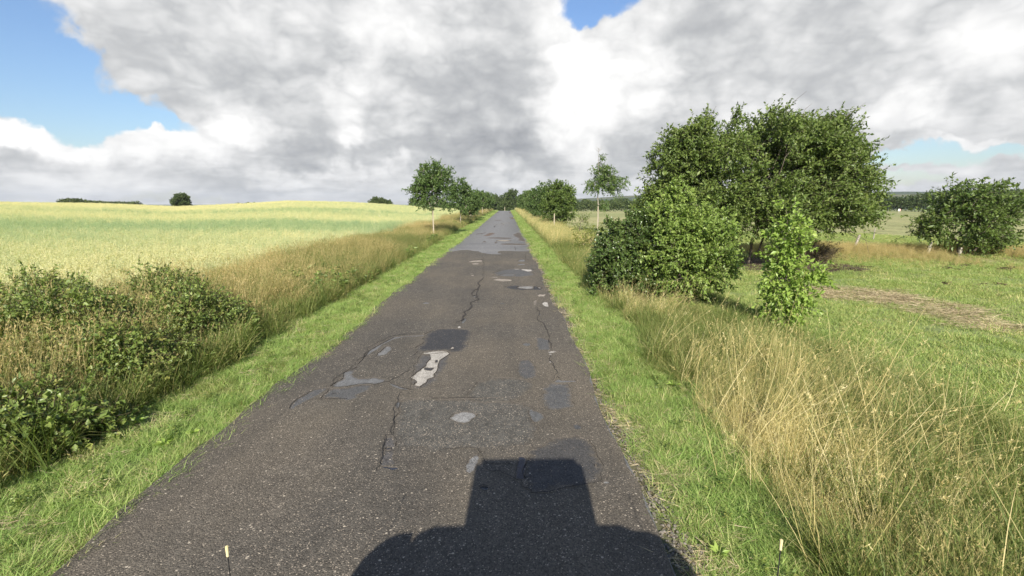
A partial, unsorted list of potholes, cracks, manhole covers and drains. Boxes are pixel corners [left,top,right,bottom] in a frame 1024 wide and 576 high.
crack [537,308,558,378]
crack [317,333,414,399]
crack [460,243,484,321]
pothole [411,350,450,387]
